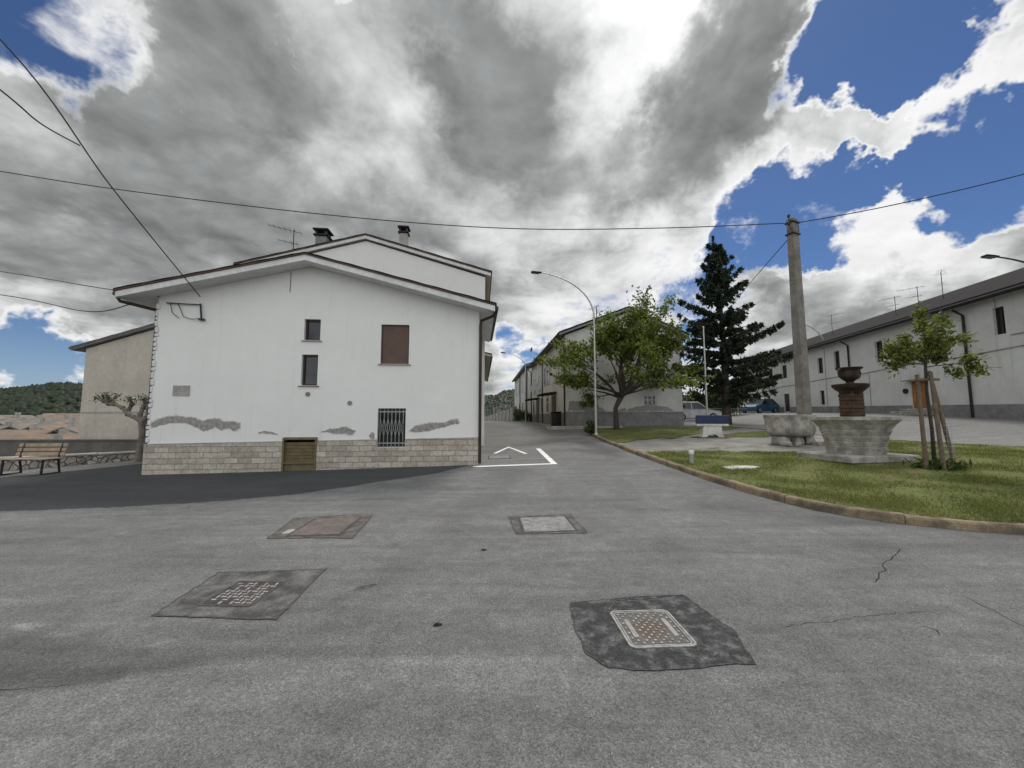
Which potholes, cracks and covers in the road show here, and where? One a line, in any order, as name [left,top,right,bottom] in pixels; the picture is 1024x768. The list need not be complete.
crack [788,612,940,636]
manhole cover [281,517,362,537]
manhole cover [517,516,578,533]
manhole cover [610,609,697,649]
crack [871,549,900,583]
